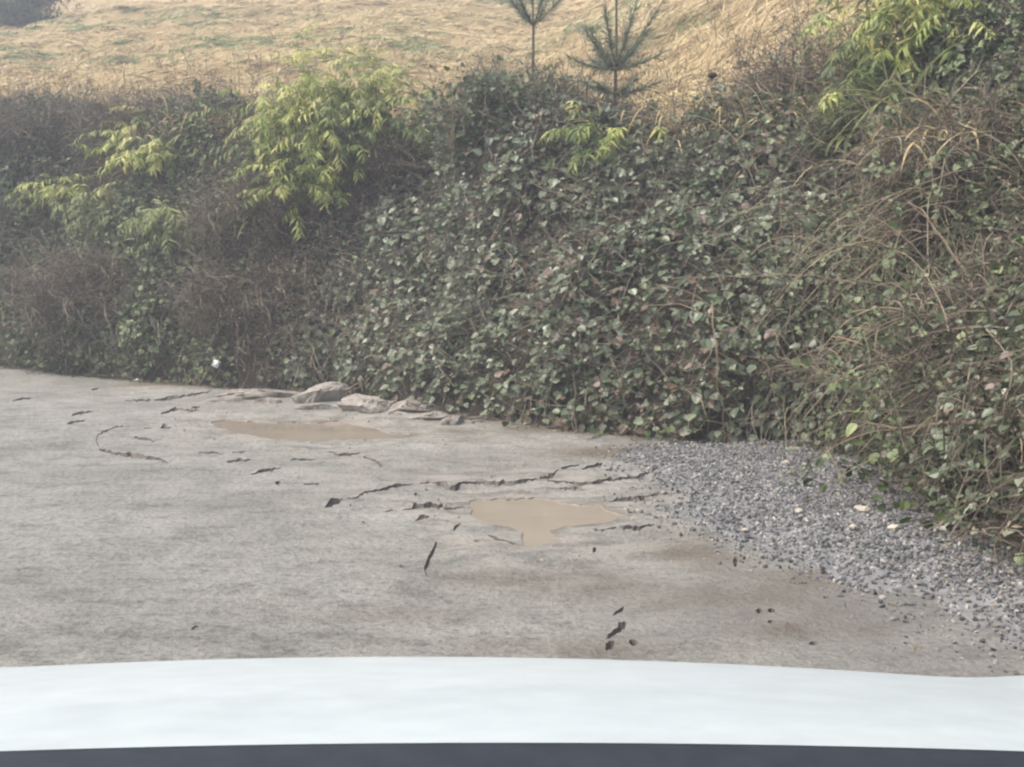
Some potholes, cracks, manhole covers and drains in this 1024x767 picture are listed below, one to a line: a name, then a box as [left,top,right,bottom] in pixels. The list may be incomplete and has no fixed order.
pothole [469,497,624,547]
crack [198,451,680,576]
crack [67,390,212,463]
crack [605,606,626,651]
pothole [211,419,410,442]
